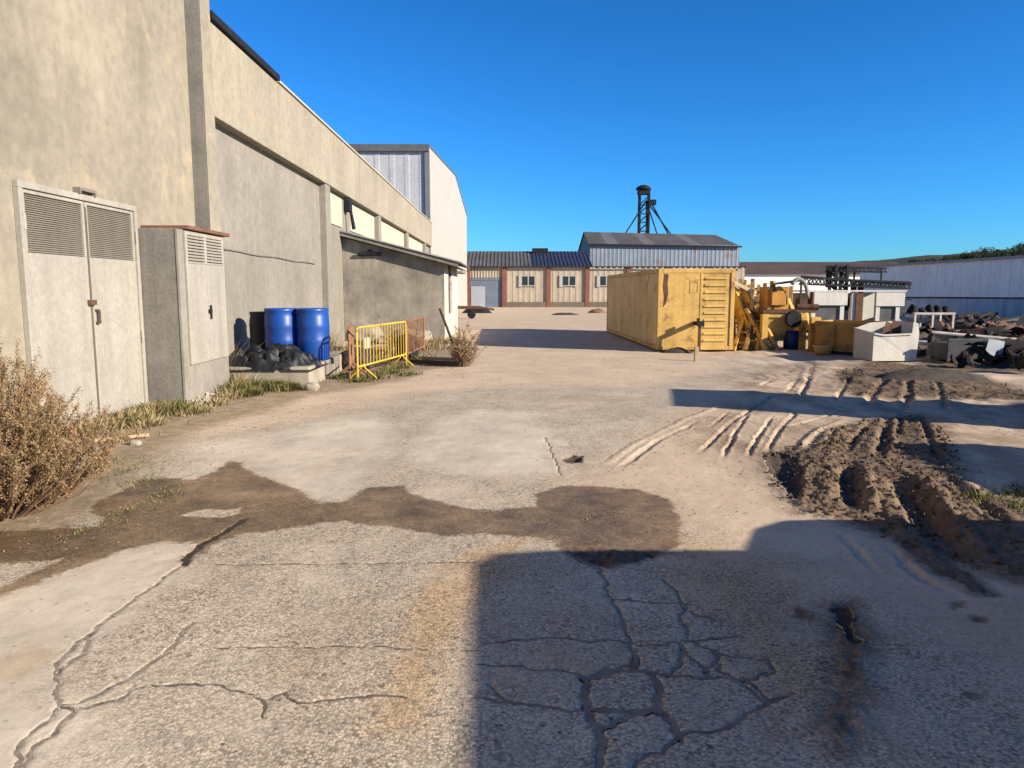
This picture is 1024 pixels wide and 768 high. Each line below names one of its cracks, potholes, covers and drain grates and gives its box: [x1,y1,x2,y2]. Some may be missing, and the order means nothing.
pothole [828,604,867,647]
crack [13,519,789,768]
pothole [562,455,585,464]
